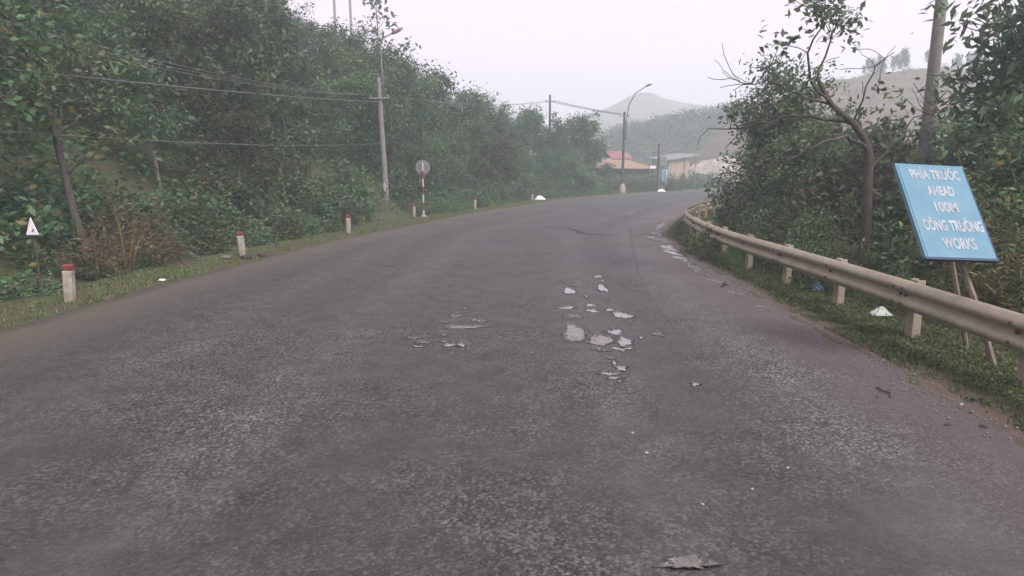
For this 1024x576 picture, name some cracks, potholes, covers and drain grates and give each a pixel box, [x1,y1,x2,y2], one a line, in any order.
pothole [584,331,620,346]
pothole [605,327,624,335]
pothole [616,335,635,348]
pothole [562,320,592,343]
pothole [609,310,637,319]
